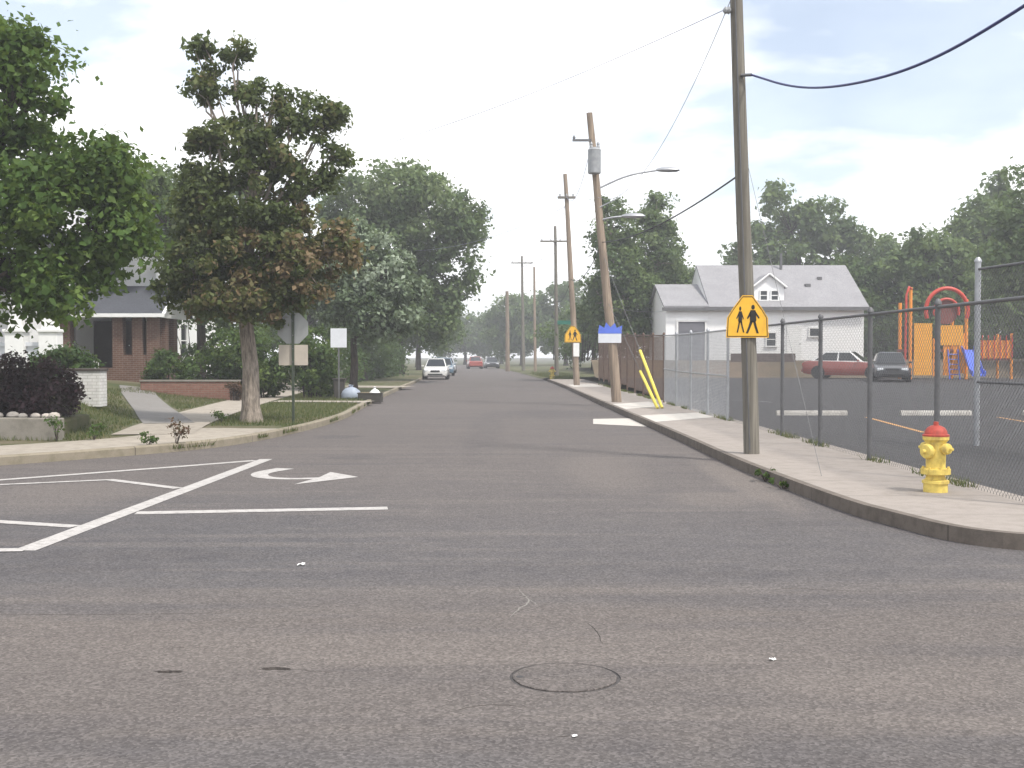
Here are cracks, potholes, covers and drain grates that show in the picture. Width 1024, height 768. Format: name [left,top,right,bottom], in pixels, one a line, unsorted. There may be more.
manhole cover [510,663,621,693]
